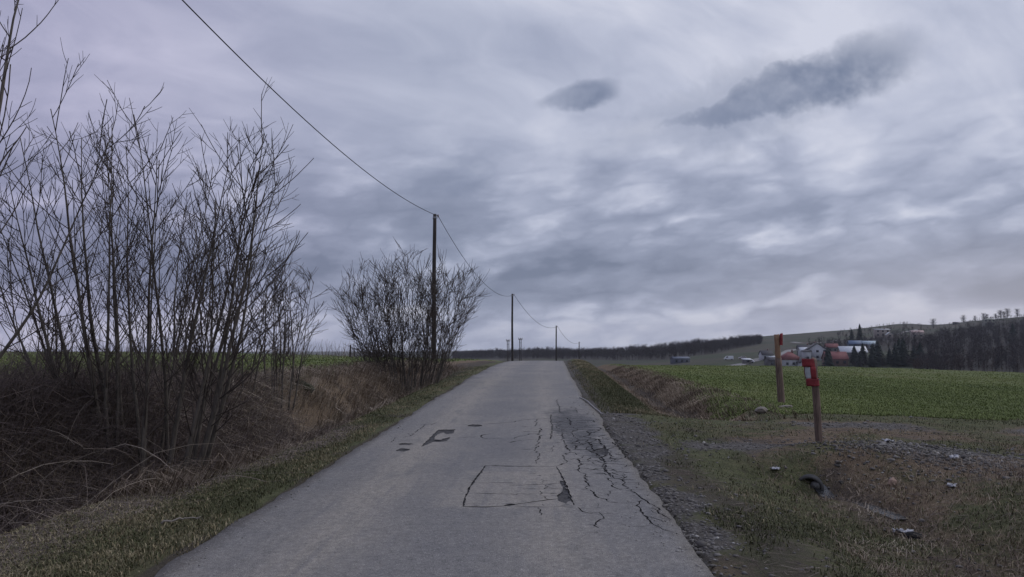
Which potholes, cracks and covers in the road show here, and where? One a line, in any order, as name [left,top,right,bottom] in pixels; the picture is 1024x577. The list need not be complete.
crack [462,400,672,533]
pothole [557,481,572,503]
pothole [422,430,454,446]
